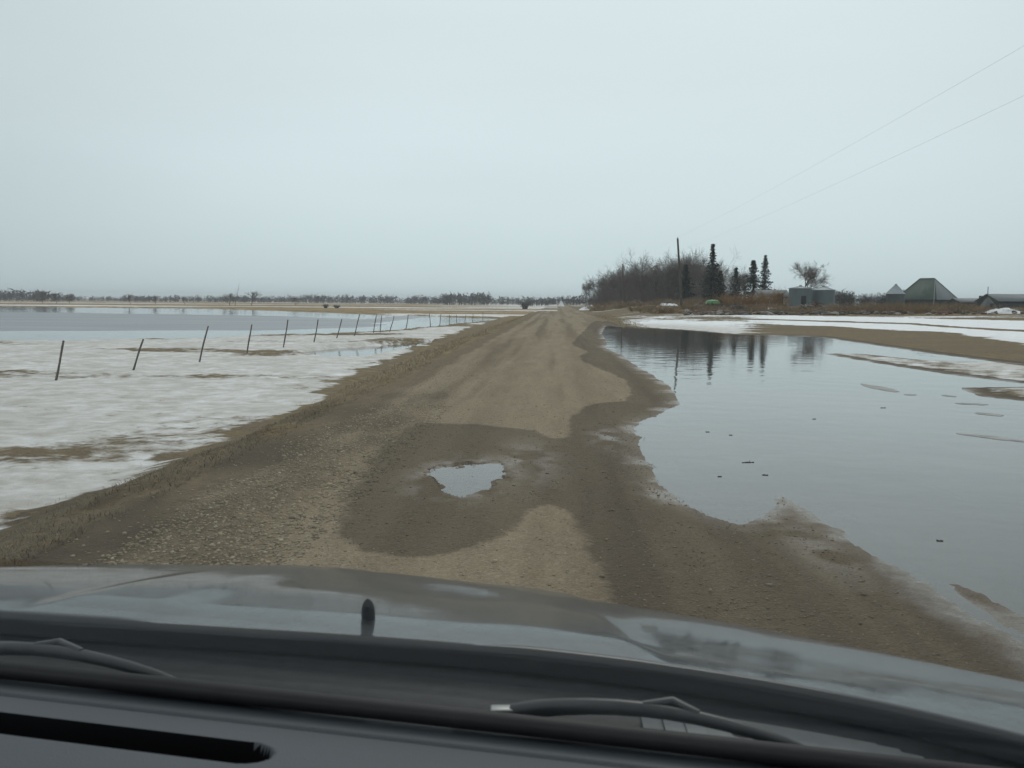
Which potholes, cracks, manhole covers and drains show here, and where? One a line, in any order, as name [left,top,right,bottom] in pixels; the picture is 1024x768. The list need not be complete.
pothole [412,459,523,501]
